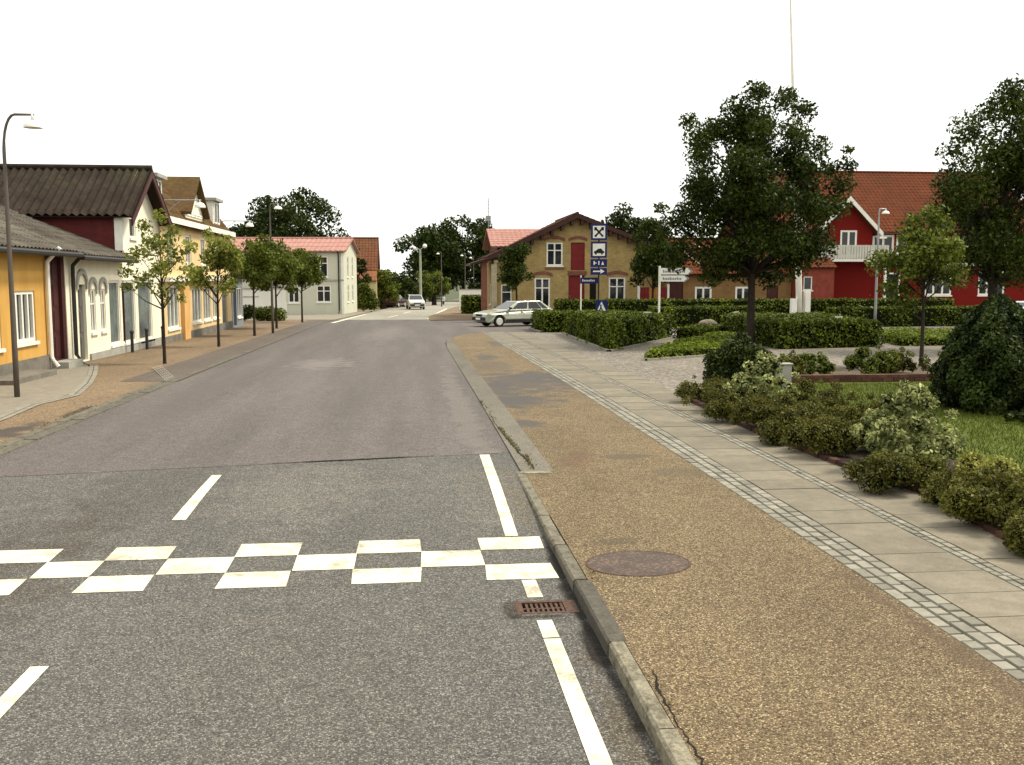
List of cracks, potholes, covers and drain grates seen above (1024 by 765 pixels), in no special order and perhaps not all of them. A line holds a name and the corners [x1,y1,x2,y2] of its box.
crack [652,670,704,765]
drain grate [514,600,580,614]
manhole cover [585,551,691,577]
